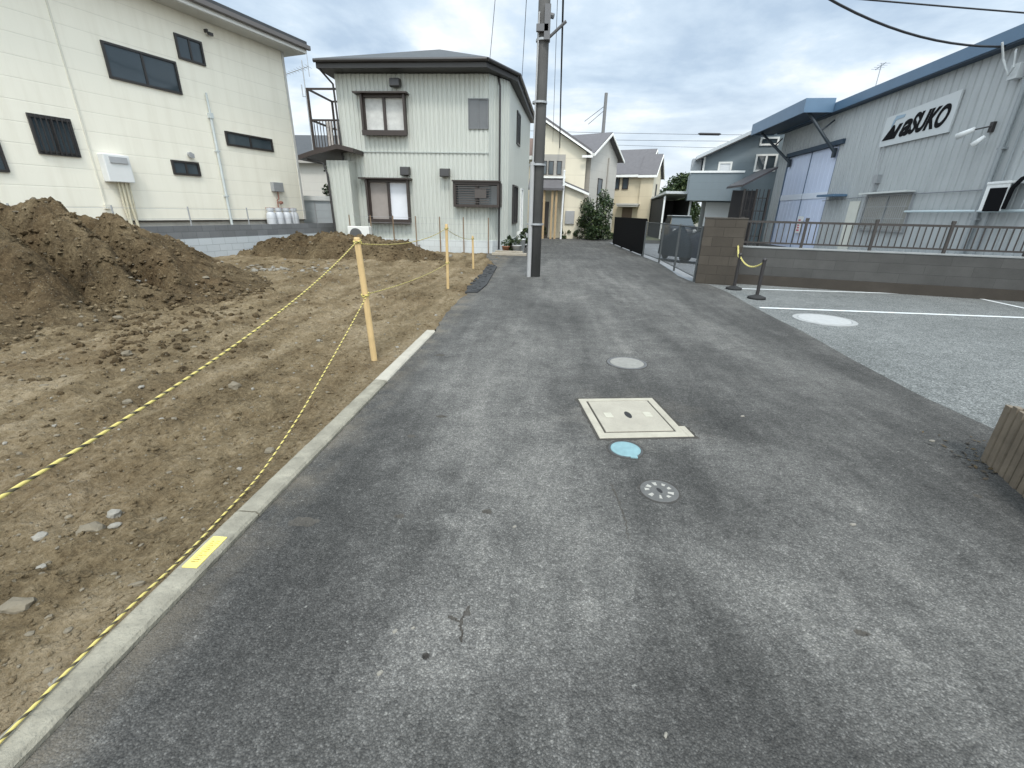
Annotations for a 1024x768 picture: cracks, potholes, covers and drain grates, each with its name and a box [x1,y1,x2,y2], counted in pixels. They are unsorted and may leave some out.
utility cover [606,440,646,460]
crack [448,605,471,642]
manhole cover [792,313,858,327]
utility cover [637,479,681,504]
crack [610,483,629,539]
manhole cover [606,357,648,370]
